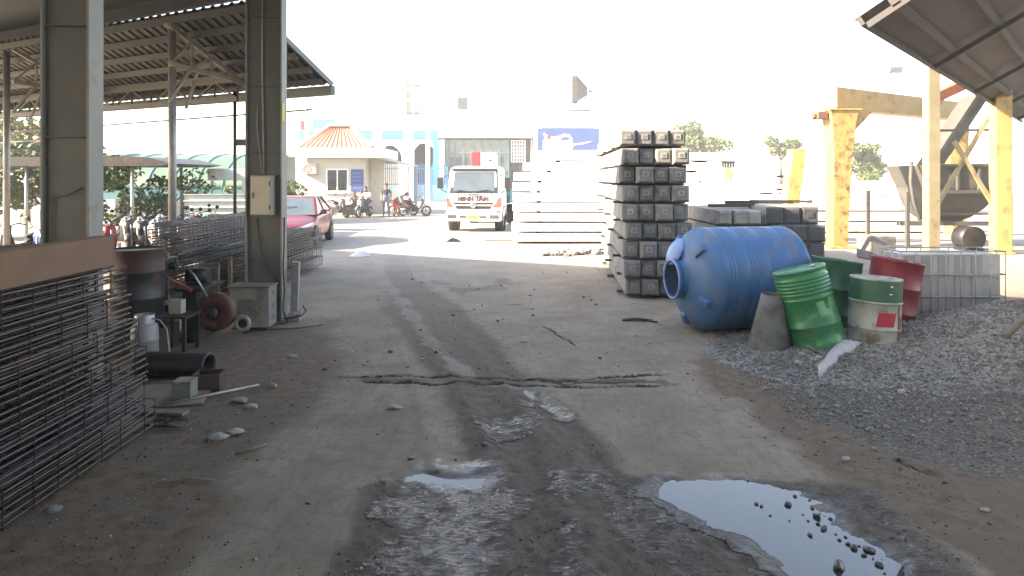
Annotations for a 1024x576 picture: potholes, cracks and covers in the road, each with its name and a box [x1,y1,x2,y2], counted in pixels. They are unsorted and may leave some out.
pothole [475,412,541,443]
crack [345,374,667,389]
pothole [633,466,961,576]
pothole [365,461,534,576]
pothole [518,387,582,423]
pothole [513,396,537,407]
